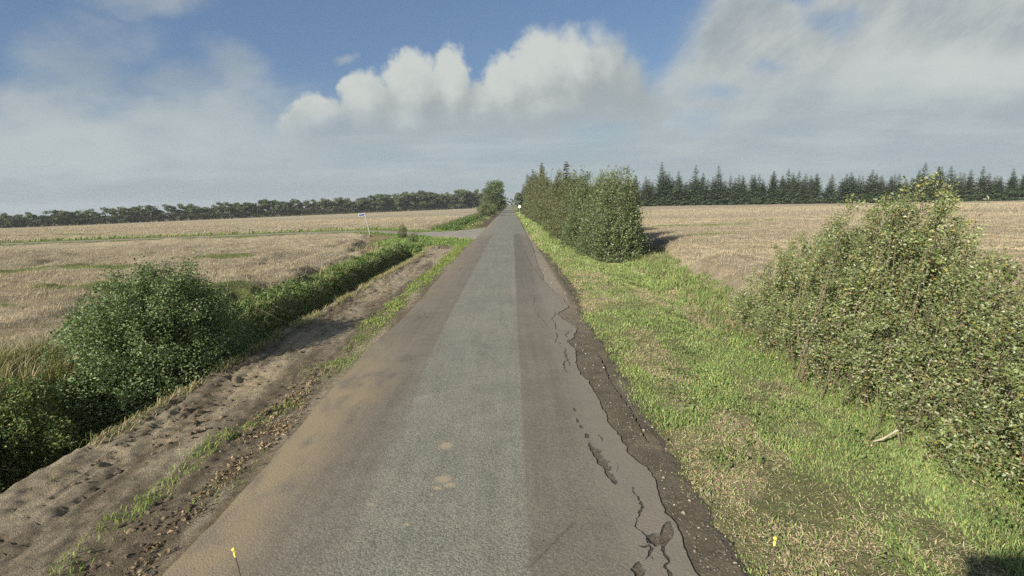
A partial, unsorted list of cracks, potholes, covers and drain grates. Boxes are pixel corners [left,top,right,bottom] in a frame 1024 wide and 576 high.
crack [632,487,673,576]
crack [534,298,572,373]
